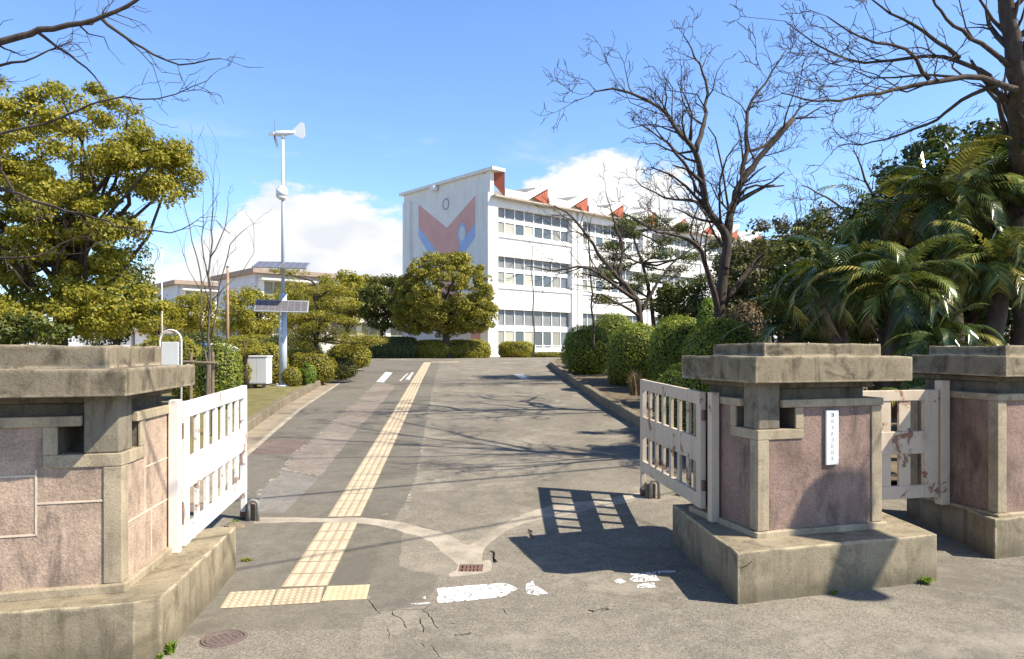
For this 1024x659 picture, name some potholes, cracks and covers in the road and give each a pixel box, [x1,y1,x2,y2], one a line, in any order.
crack [369,601,454,656]
manhole cover [199,629,249,649]
drain grate [458,564,483,572]
